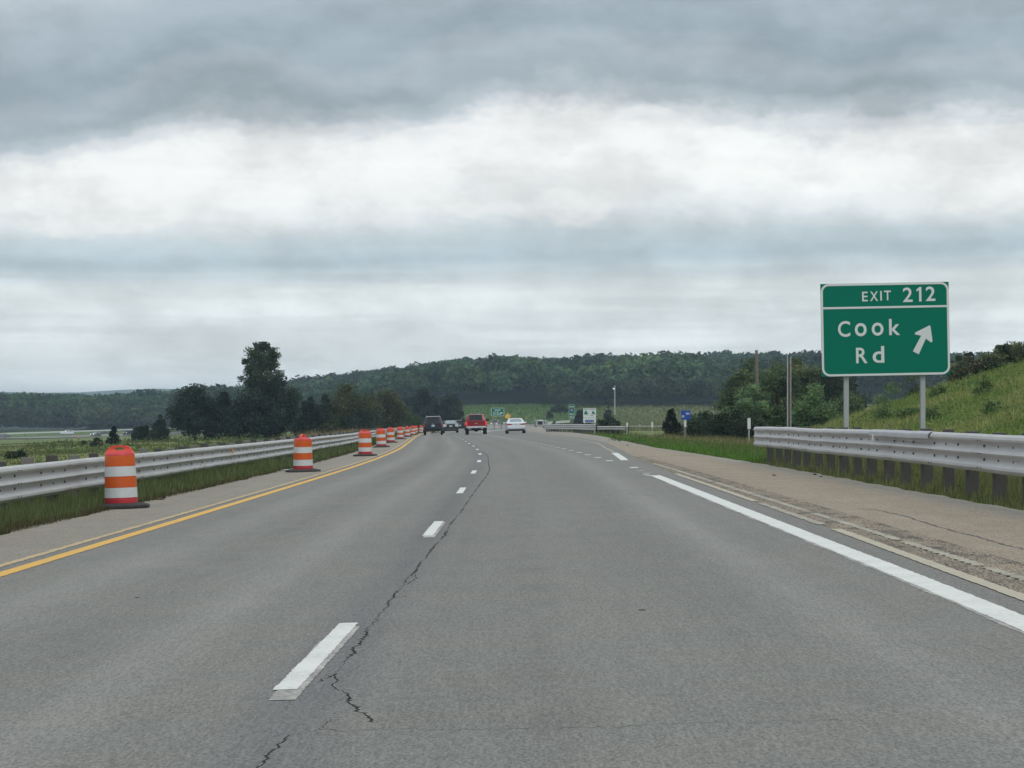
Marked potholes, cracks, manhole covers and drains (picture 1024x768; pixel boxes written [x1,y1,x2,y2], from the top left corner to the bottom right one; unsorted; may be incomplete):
crack [256,452,819,768]
crack [855,508,1024,550]
